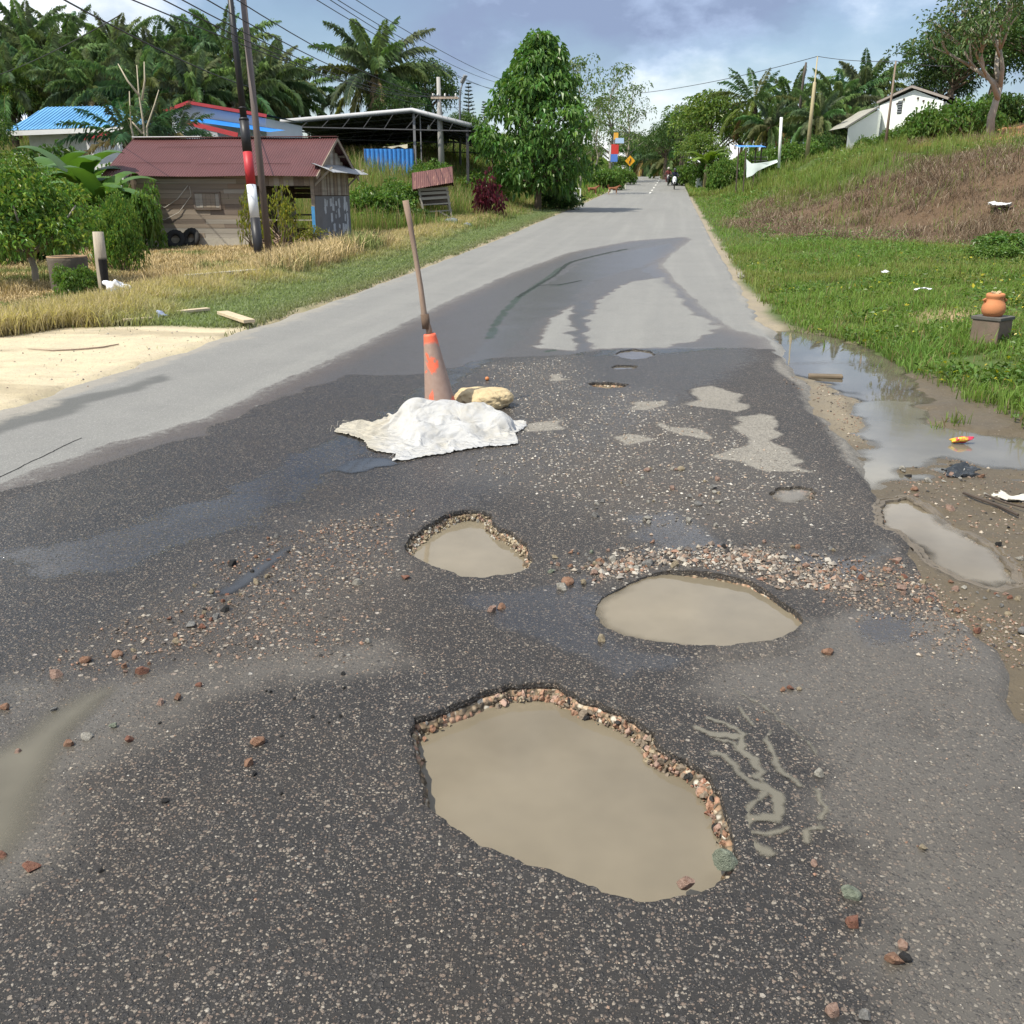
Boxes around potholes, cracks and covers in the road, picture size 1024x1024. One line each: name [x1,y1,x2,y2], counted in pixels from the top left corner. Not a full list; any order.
pothole [755,482,832,508]
pothole [608,348,662,361]
pothole [872,494,1024,592]
pothole [575,565,826,661]
pothole [579,381,637,390]
pothole [387,506,550,585]
pothole [385,672,770,927]
crack [693,694,828,856]
